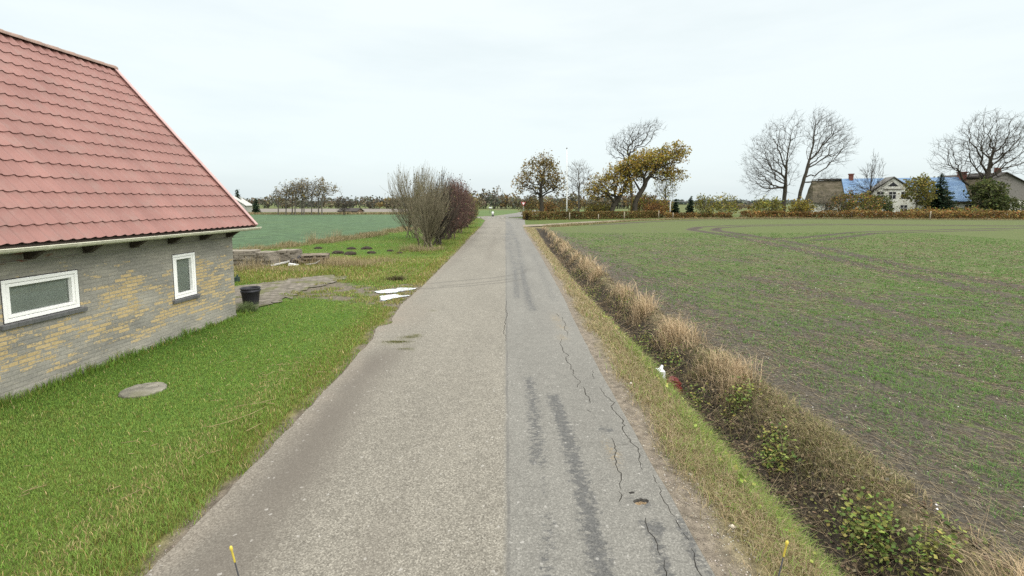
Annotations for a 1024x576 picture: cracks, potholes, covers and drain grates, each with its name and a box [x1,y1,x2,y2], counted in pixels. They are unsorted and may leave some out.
crack [557,314,702,576]
manhole cover [118,382,167,399]
